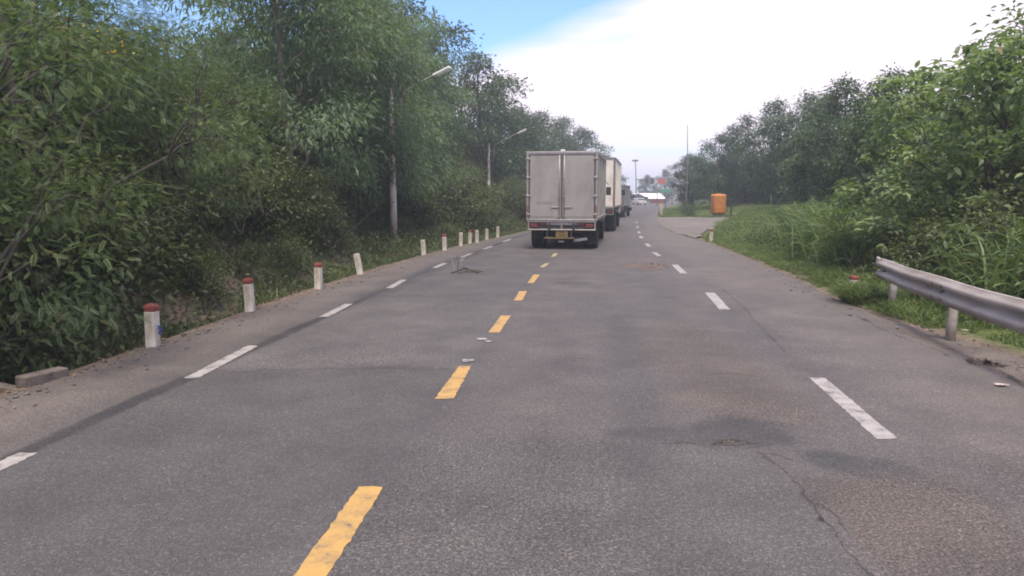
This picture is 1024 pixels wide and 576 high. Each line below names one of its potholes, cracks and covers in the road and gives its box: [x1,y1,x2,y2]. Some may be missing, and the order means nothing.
pothole [957,357,1017,369]
crack [723,289,785,352]
pothole [696,436,774,449]
